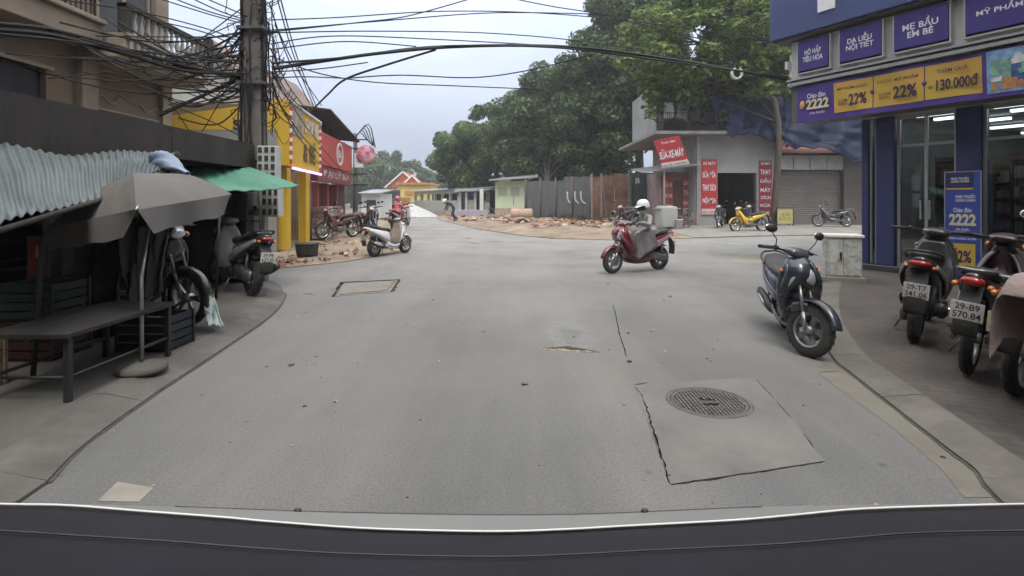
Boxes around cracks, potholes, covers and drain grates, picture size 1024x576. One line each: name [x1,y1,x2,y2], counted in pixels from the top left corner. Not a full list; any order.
crack [613,306,626,355]
manhole cover [331,279,401,297]
